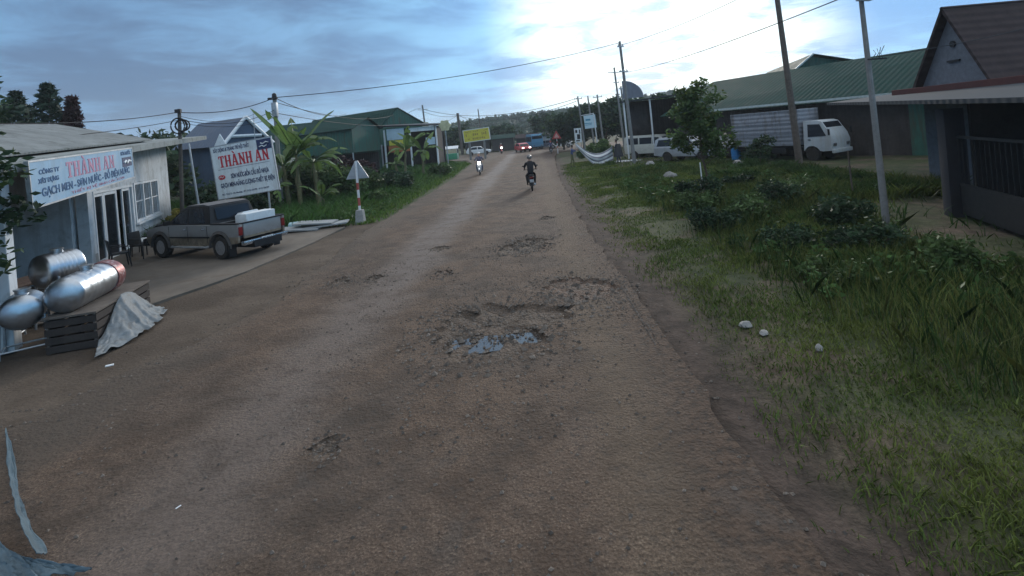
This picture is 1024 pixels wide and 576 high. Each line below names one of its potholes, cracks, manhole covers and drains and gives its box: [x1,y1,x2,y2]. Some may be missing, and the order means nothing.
pothole [298,430,350,469]
pothole [487,234,562,260]
pothole [395,291,623,387]
pothole [524,271,647,311]
